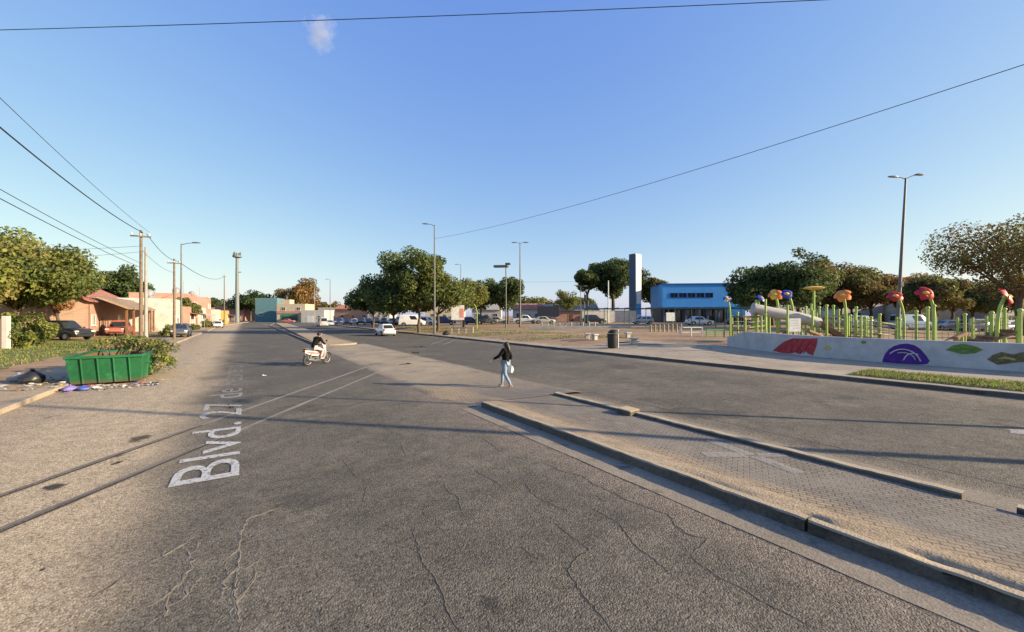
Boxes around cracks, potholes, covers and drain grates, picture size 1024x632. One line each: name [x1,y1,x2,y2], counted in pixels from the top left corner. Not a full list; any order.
crack [319,587,342,619]
crack [411,473,500,631]
crack [142,535,201,627]
crack [218,507,280,631]
crack [521,464,814,630]
